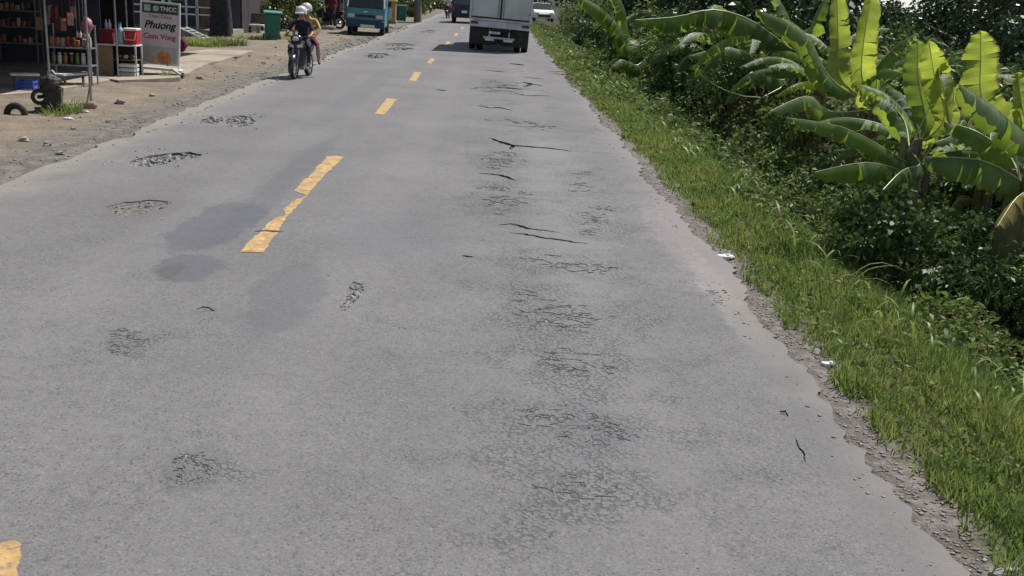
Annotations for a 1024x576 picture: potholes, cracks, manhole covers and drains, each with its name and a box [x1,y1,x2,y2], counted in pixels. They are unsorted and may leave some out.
pothole [72,200,182,220]
pothole [215,113,266,129]
pothole [102,147,209,169]
crack [475,63,619,276]
